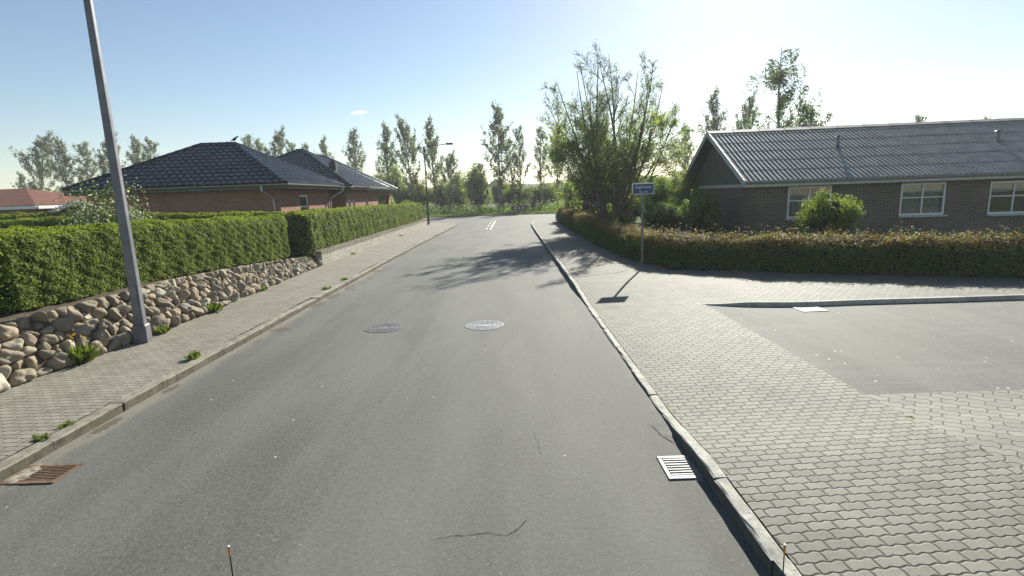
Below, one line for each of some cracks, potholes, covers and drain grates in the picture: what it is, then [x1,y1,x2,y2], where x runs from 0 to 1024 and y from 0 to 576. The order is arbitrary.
manhole cover [364,323,404,333]
drain grate [657,454,706,481]
manhole cover [466,320,504,330]
drain grate [0,463,83,487]
